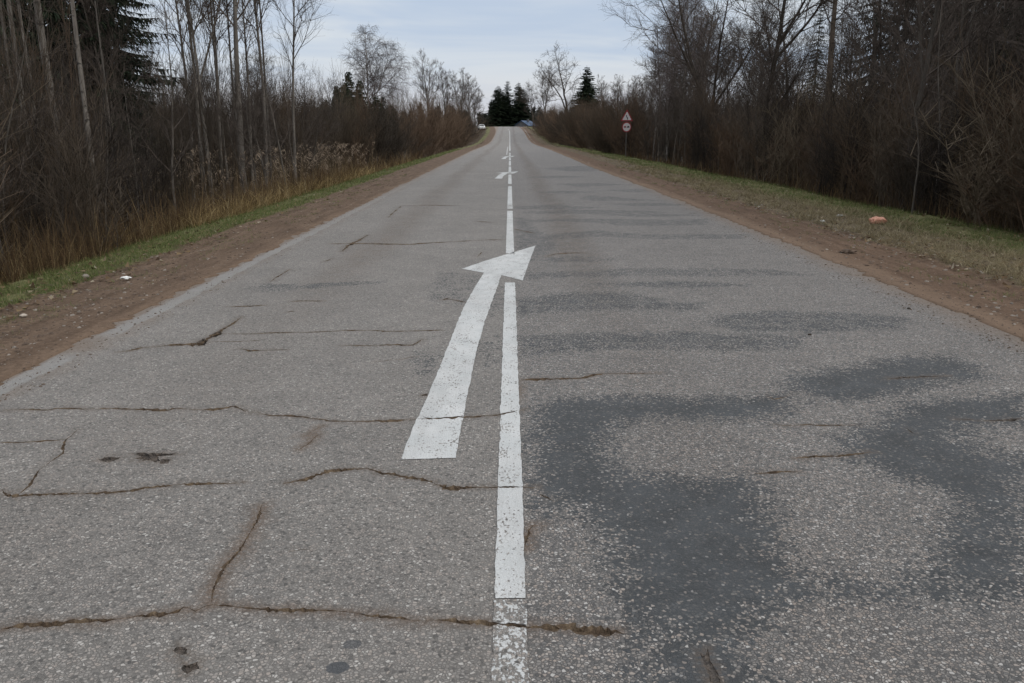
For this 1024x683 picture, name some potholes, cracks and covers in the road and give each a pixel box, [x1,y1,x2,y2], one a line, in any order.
crack [524,373,645,381]
crack [21,406,515,448]
crack [0,508,623,637]
crack [754,452,868,474]
crack [2,431,232,498]
crack [123,305,435,362]
pothole [132,453,175,463]
crack [324,235,482,262]
